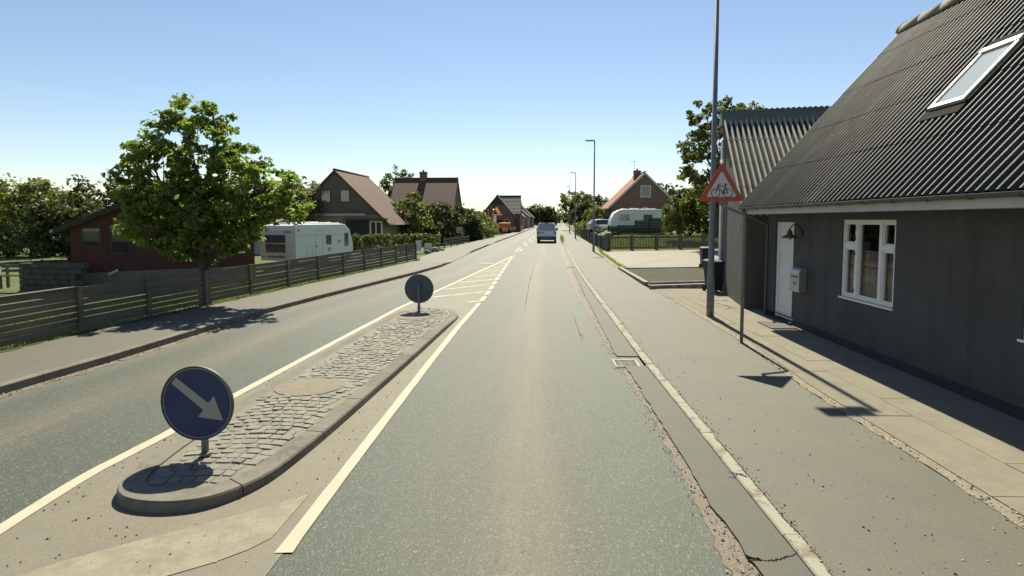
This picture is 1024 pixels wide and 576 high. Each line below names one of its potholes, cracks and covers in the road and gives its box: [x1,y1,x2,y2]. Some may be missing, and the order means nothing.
drain grate [612,355,653,367]
